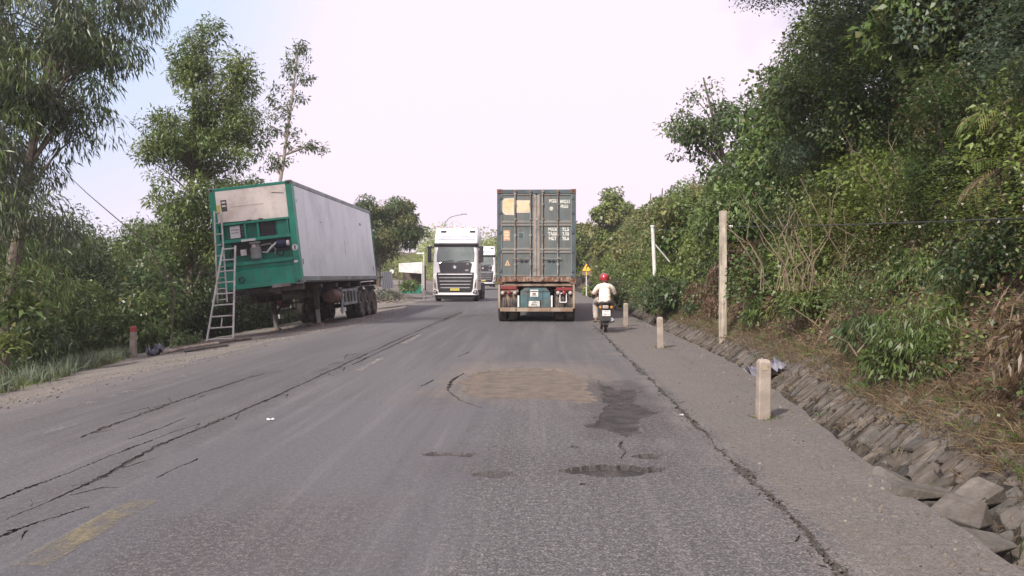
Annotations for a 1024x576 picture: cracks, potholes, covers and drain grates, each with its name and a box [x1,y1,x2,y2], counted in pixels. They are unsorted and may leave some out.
crack [0,312,463,541]
pothole [559,464,666,478]
pothole [471,471,516,479]
crack [594,326,854,576]
crack [421,373,482,408]
